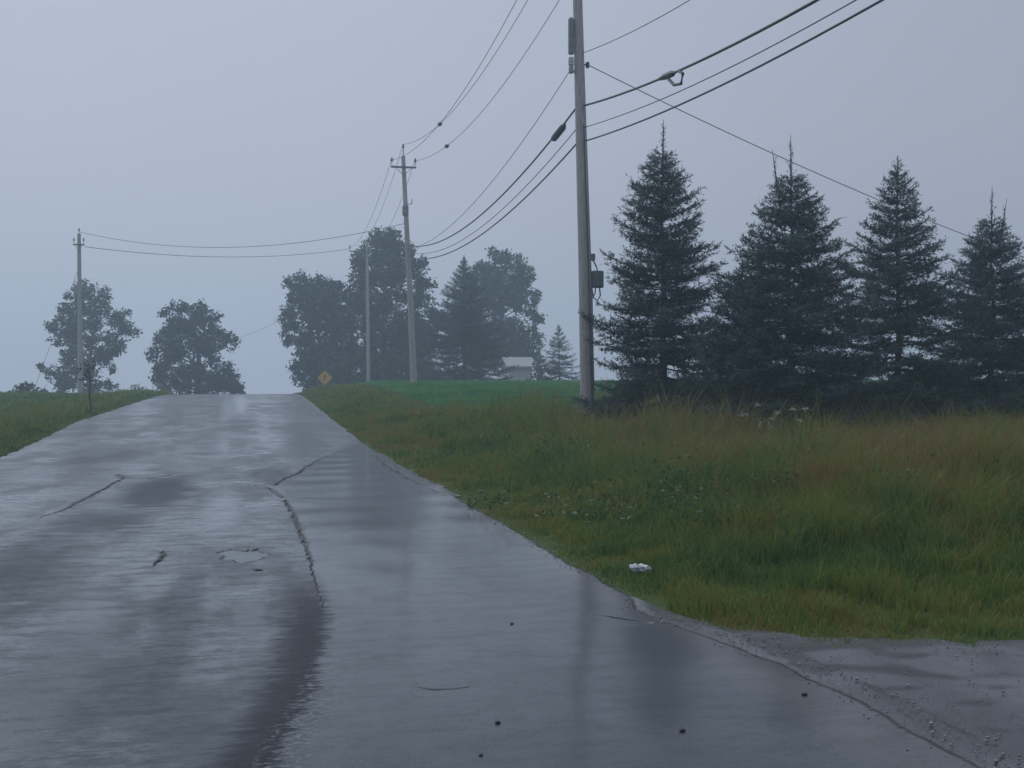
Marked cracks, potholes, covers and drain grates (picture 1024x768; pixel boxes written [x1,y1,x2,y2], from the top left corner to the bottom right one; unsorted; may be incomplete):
crack [584,611,659,626]
crack [401,680,486,698]
crack [137,550,185,567]
pothole [199,546,289,566]
crack [28,469,206,518]
